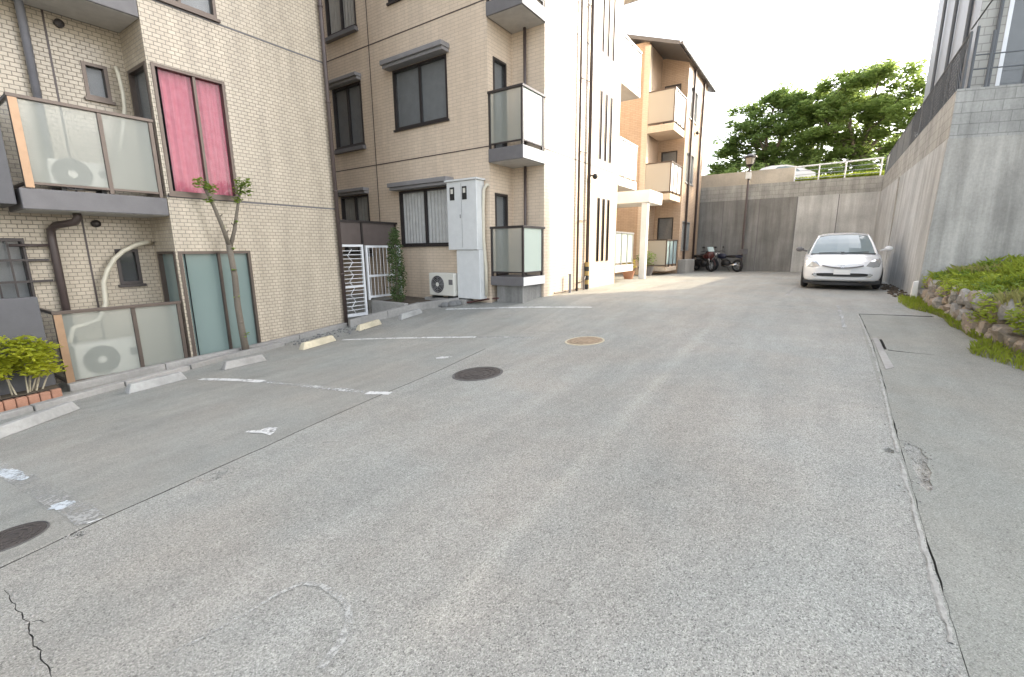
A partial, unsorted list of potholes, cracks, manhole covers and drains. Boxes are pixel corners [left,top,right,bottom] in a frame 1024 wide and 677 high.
manhole cover [565,336,605,346]
crack [0,587,80,677]
manhole cover [0,521,50,552]
manhole cover [452,367,503,381]
pothole [901,440,939,493]
